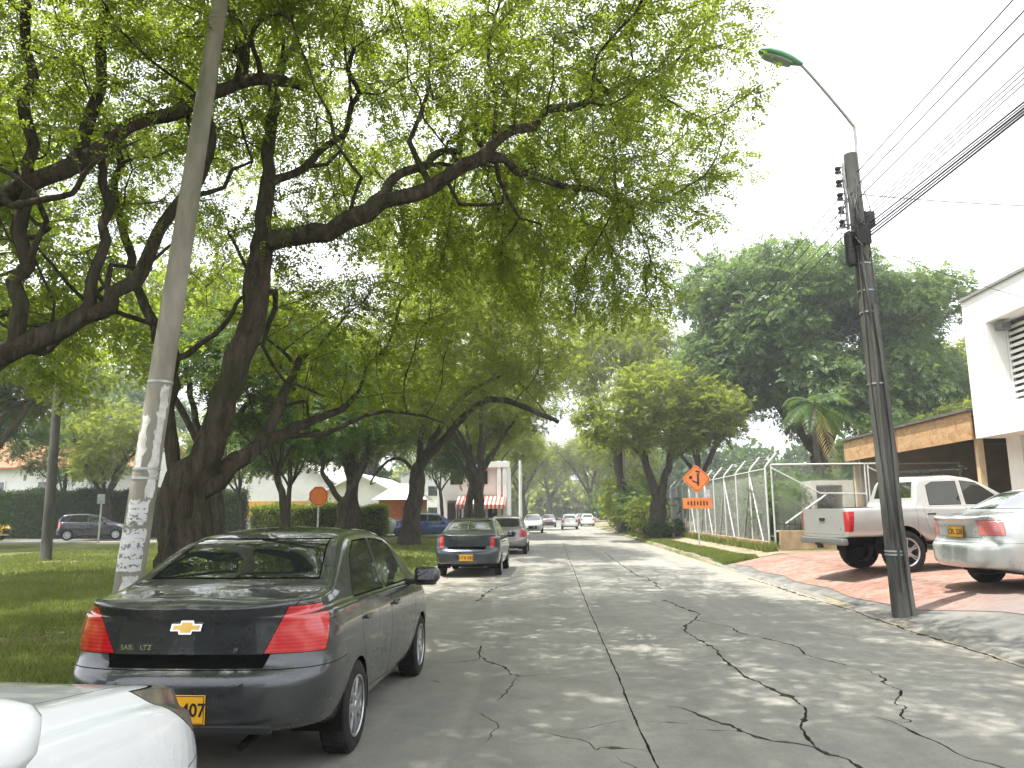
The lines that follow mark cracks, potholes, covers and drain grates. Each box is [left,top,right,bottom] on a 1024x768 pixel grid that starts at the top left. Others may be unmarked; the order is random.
crack [605,552,863,768]
crack [536,720,642,768]
crack [431,645,604,742]
